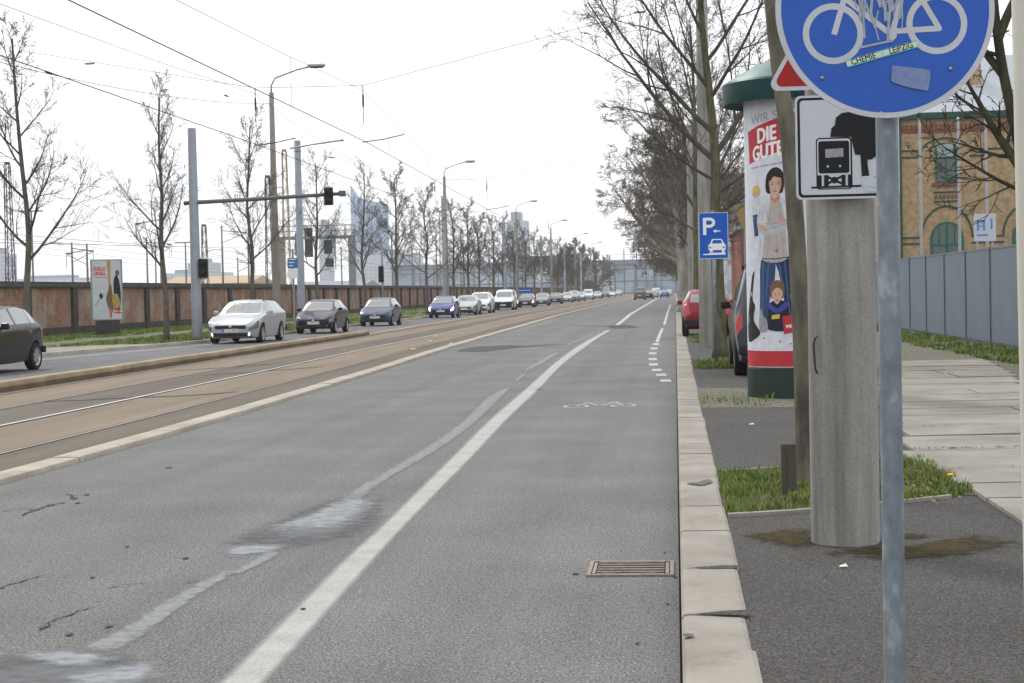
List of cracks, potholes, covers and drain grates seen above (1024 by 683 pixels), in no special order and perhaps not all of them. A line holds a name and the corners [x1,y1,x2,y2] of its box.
drain grate [586,560,674,577]
crack [2,493,74,516]
